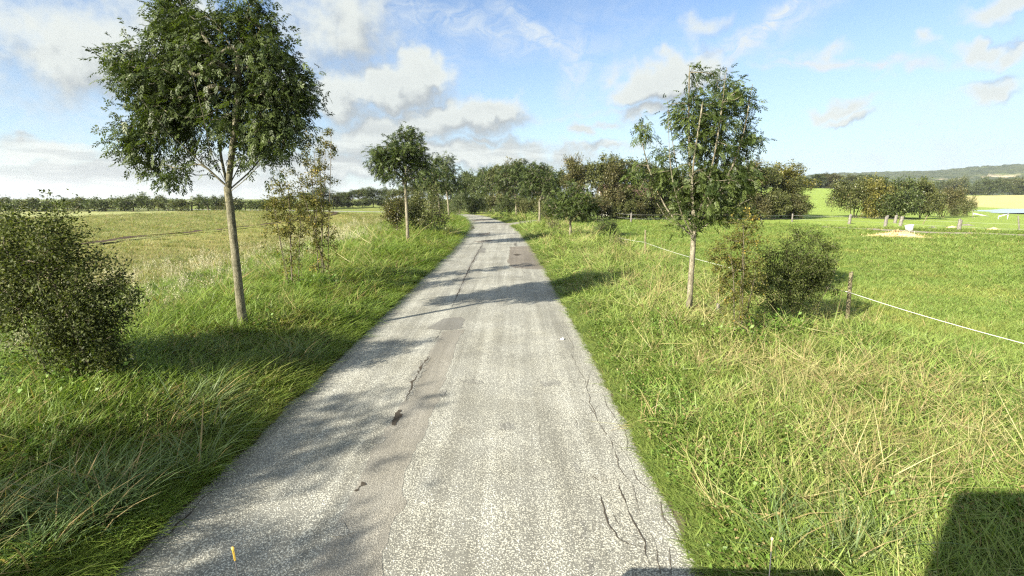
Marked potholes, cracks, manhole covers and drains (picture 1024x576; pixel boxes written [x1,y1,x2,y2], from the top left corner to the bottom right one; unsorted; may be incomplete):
crack [404,336,438,401]
crack [569,338,682,574]
